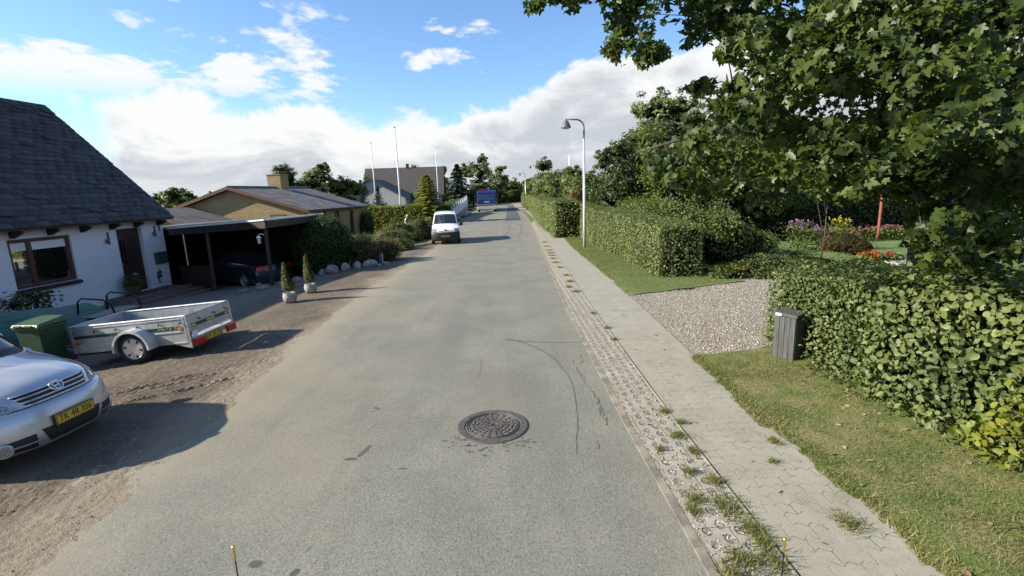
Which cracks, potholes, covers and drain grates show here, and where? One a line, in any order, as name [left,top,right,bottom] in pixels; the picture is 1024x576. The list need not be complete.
crack [505,339,607,452]
manhole cover [457,410,528,444]
